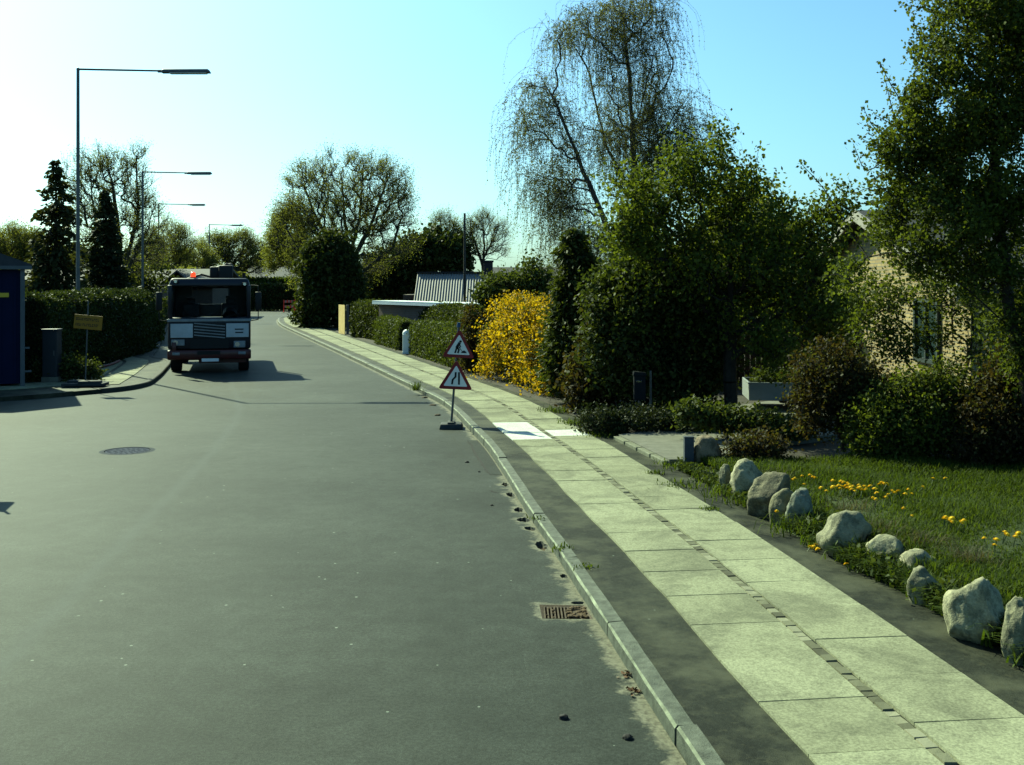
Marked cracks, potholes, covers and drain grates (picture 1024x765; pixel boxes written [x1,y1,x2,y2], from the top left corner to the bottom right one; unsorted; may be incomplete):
manhole cover [99,447,155,455]
drain grate [539,605,593,619]
